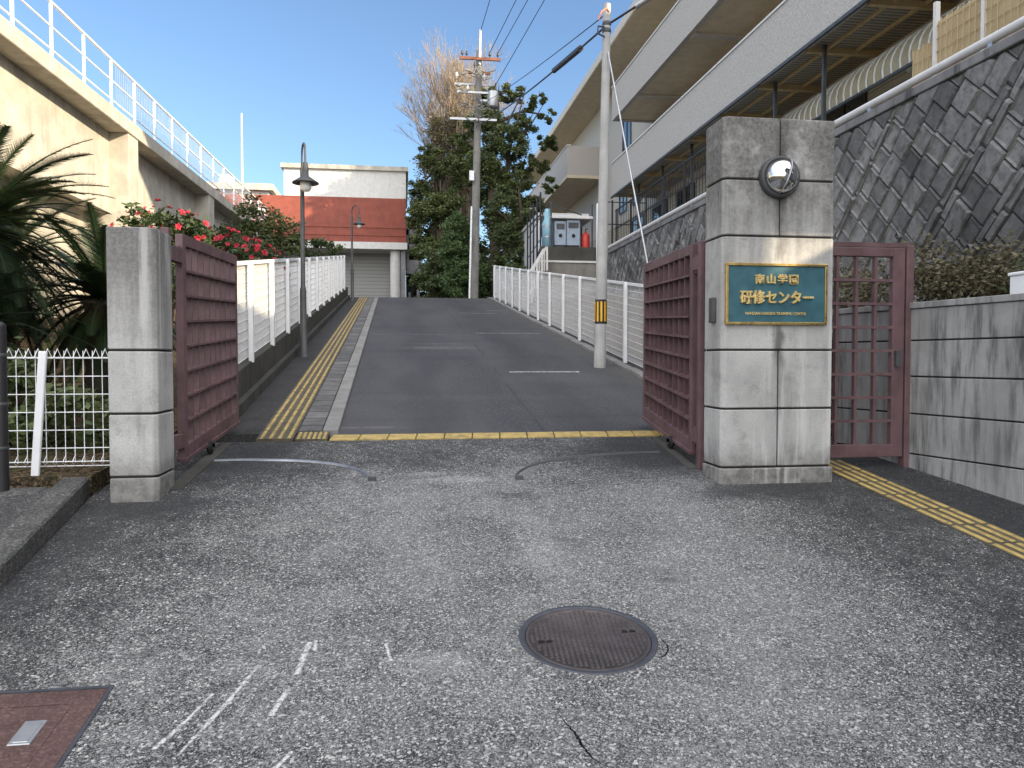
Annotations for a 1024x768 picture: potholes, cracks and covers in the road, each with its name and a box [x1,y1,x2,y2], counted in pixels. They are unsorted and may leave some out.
utility cover [0,685,115,768]
crack [562,717,603,765]
manhole cover [519,605,658,675]
